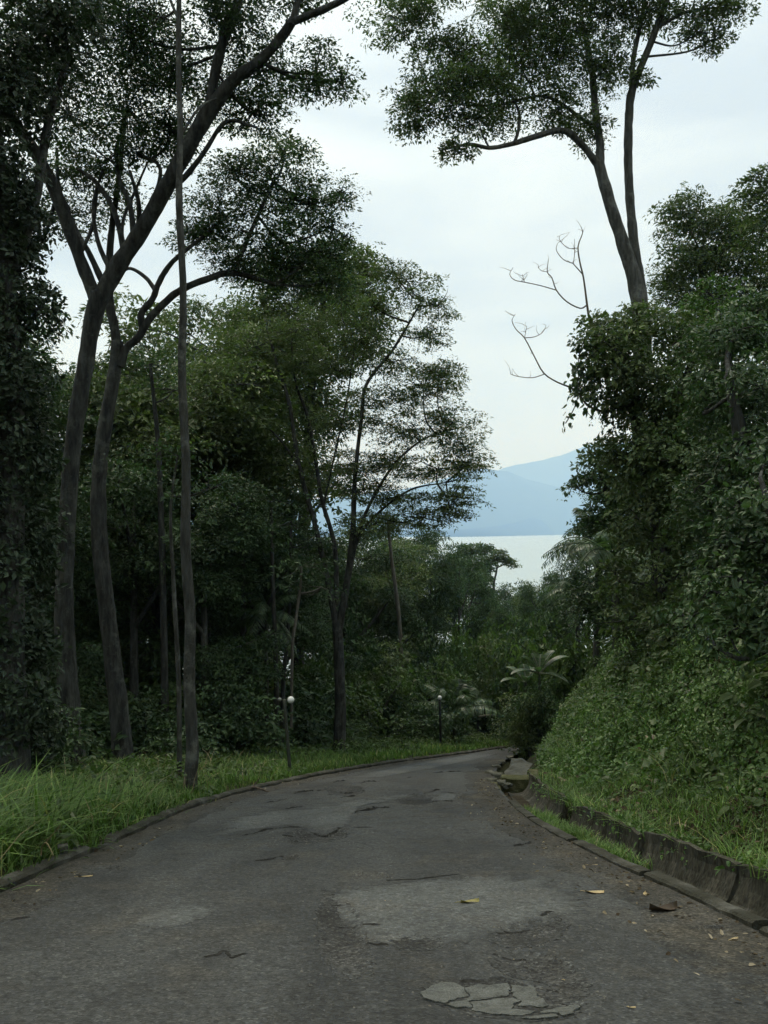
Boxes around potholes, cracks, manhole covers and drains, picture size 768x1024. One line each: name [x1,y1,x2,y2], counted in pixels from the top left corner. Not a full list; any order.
crack [203,949,247,958]
crack [243,780,389,861]
